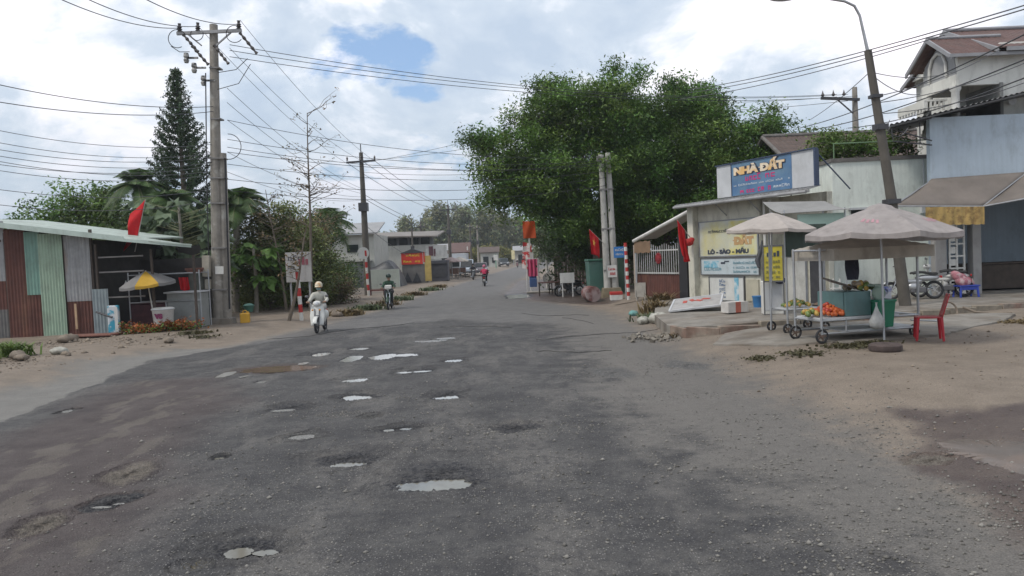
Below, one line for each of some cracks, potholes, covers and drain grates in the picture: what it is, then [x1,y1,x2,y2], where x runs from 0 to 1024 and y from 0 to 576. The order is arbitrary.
pothole [66,488,159,518]
pothole [207,452,232,461]
pothole [362,421,436,434]
pothole [298,346,456,369]
pothole [419,385,472,405]
